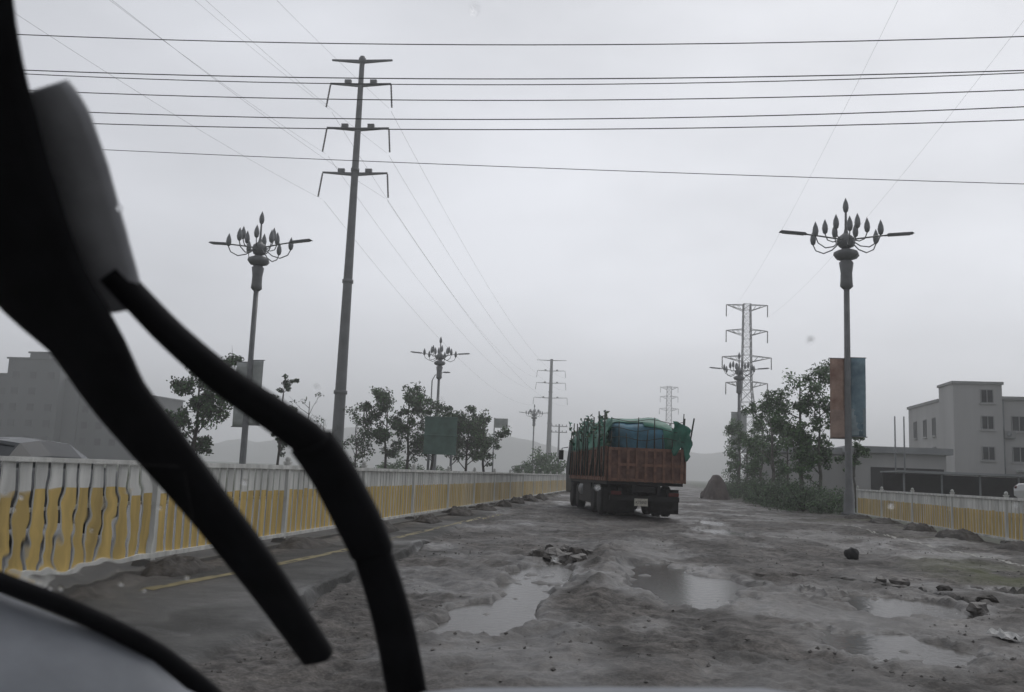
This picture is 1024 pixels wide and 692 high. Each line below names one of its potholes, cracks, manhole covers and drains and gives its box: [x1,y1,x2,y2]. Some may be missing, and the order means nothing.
pothole [801,622,990,670]
pothole [820,590,988,620]
pothole [611,557,769,609]
pothole [414,557,578,641]
pothole [696,518,724,526]
